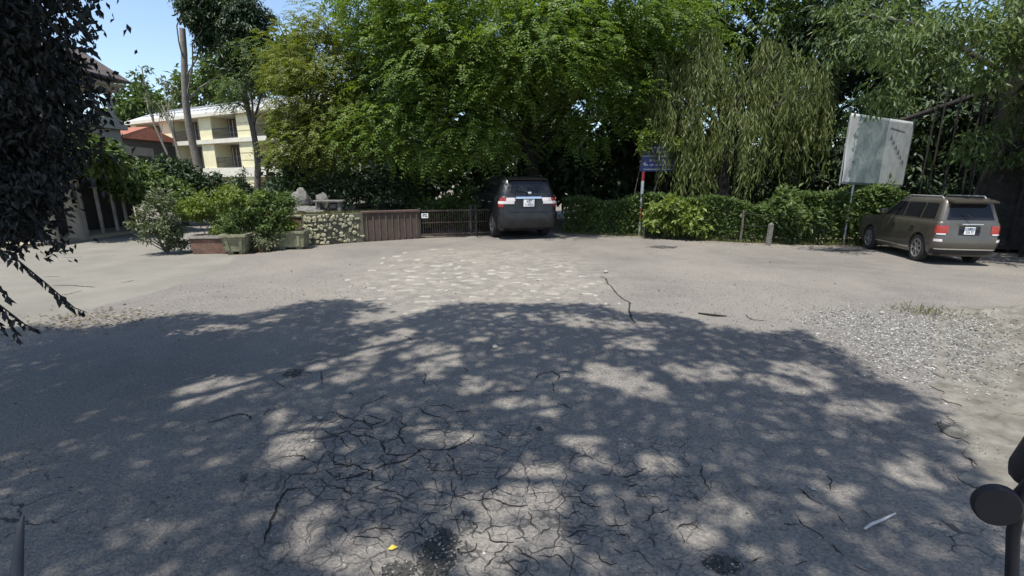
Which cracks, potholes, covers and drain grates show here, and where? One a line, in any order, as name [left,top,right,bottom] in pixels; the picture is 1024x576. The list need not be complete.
crack [264,392,869,575]
pothole [416,527,463,576]
pothole [702,553,744,576]
pothole [281,369,303,378]
crack [600,276,635,322]
